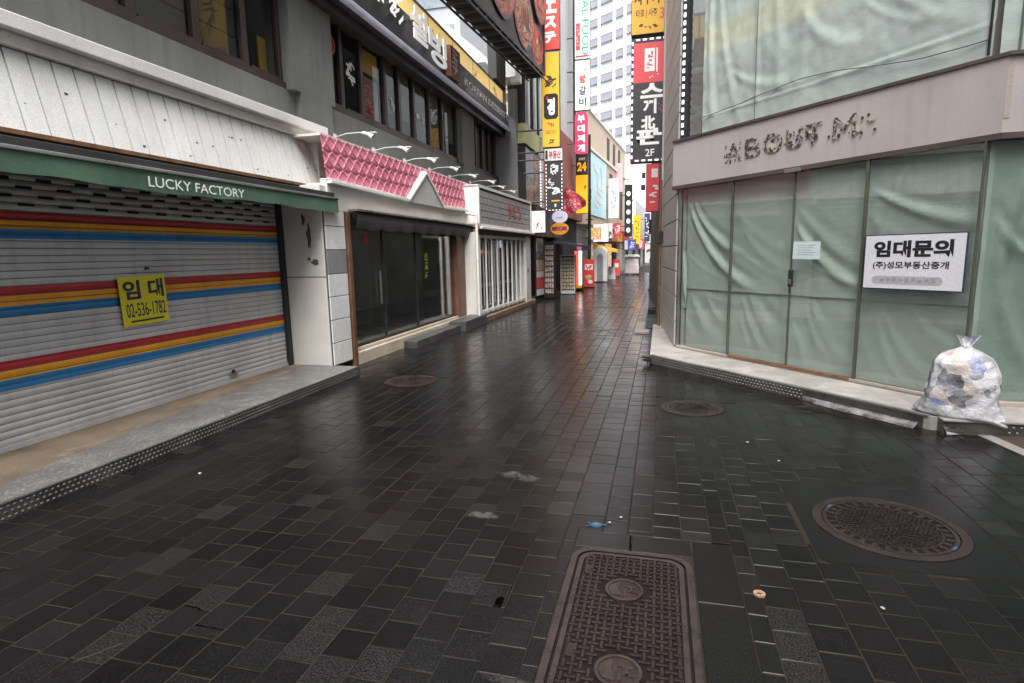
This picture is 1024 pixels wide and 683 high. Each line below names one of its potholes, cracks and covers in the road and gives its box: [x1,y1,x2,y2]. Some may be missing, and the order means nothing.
manhole cover [661,400,724,417]
manhole cover [811,497,974,562]
crack [184,605,223,630]
manhole cover [384,375,437,387]
manhole cover [535,547,704,683]
